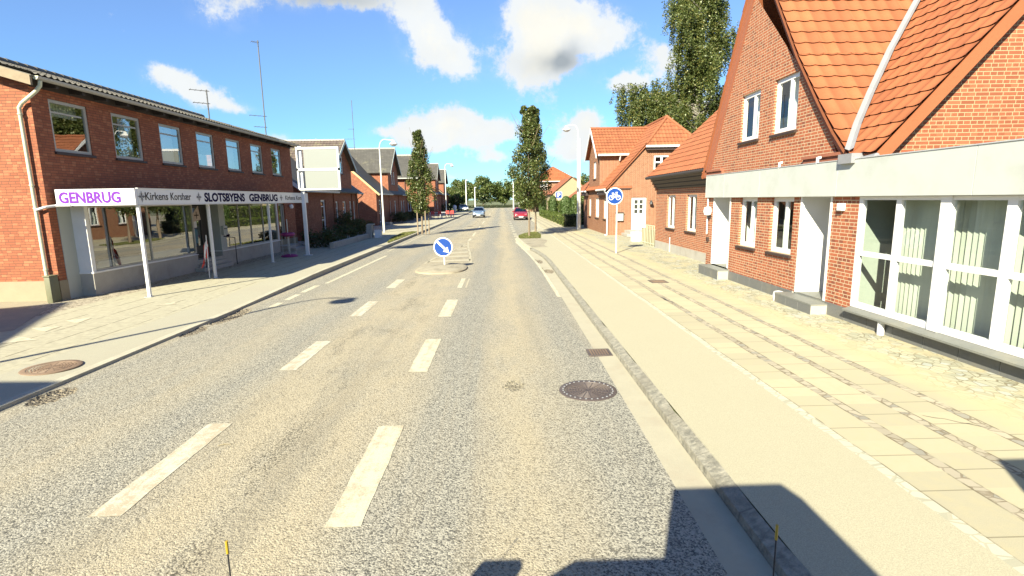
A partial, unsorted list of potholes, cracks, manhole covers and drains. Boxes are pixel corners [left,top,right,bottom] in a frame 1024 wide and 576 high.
pothole [203,308,268,326]
pothole [174,326,226,338]
pothole [6,386,101,409]
manhole cover [559,380,617,401]
manhole cover [18,360,83,376]
drain grate [586,348,613,357]
